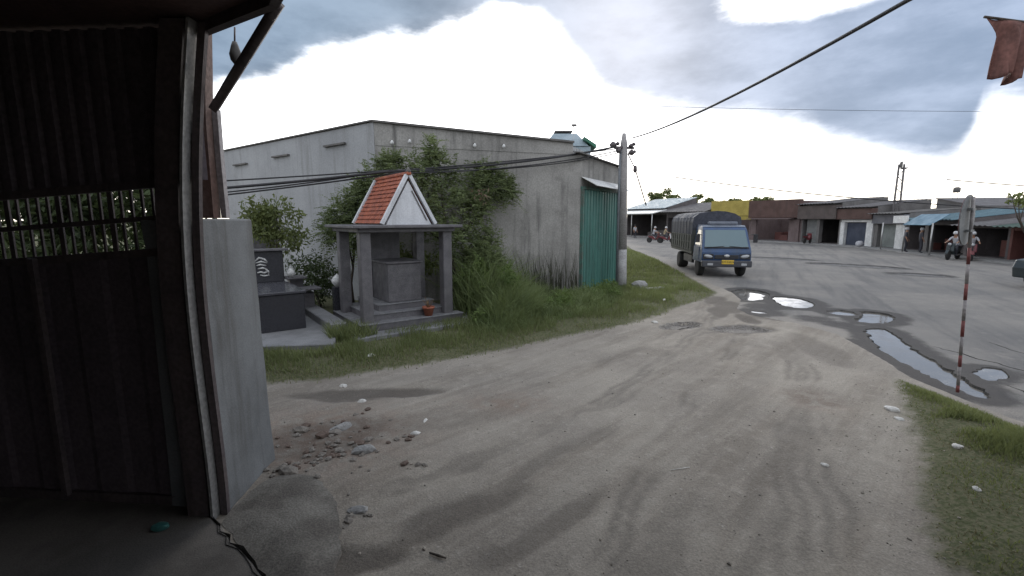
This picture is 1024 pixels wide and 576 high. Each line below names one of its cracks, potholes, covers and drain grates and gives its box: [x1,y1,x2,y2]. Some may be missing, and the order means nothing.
pothole [730,289,770,300]
pothole [771,296,815,308]
pothole [863,328,991,399]
pothole [971,367,1010,381]
crack [212,517,266,576]
pothole [854,311,896,323]
